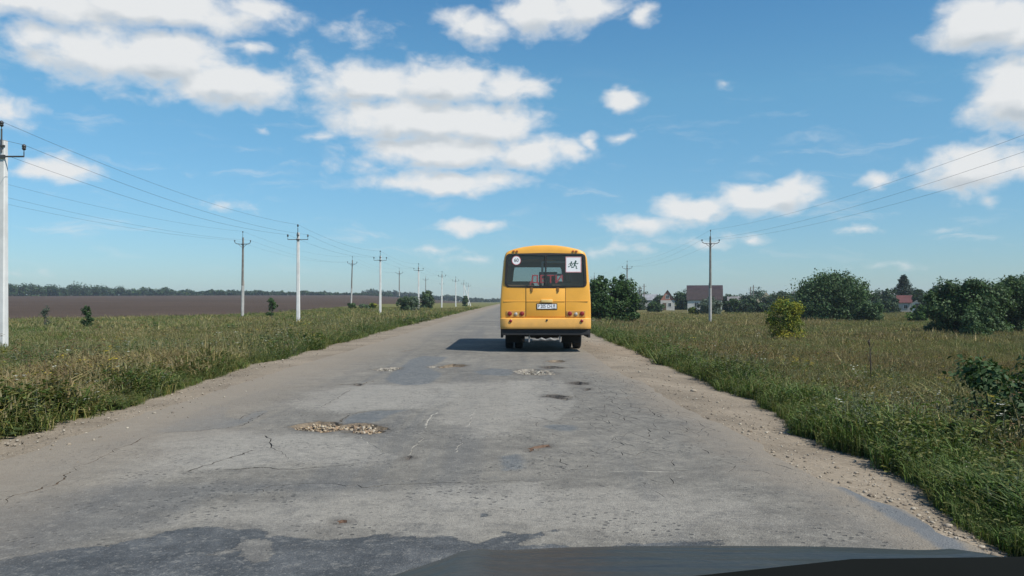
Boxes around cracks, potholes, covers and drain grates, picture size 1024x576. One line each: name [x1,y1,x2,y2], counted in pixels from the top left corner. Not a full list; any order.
pothole [291,421,391,435]
crack [5,439,140,502]
crack [159,366,791,497]
